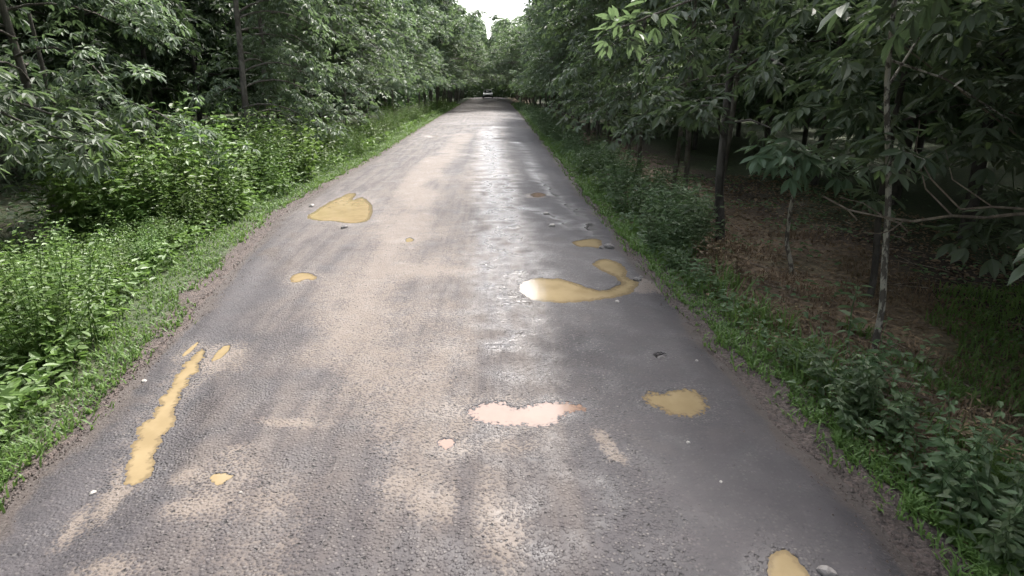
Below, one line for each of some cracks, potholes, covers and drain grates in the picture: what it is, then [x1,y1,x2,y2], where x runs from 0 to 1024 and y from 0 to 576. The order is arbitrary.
pothole [571,238,603,248]
pothole [210,344,232,362]
pothole [518,259,640,303]
pothole [640,387,712,418]
pothole [466,400,588,428]
pothole [436,437,456,450]
pothole [208,472,235,486]
